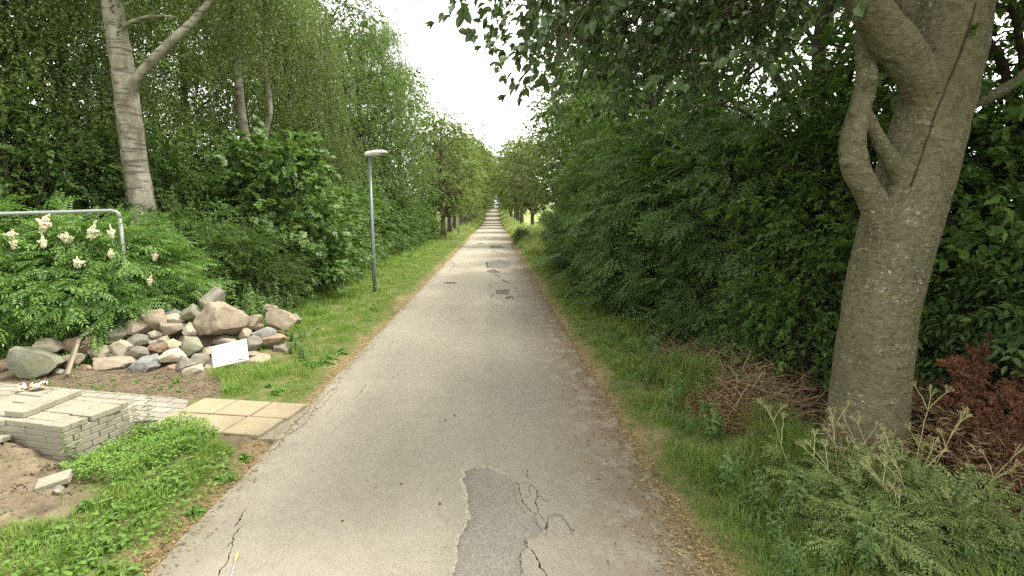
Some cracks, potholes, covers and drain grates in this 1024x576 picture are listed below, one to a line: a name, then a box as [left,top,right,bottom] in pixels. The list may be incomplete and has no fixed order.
crack [516,469,548,530]
crack [520,540,547,576]
crack [218,508,247,576]
